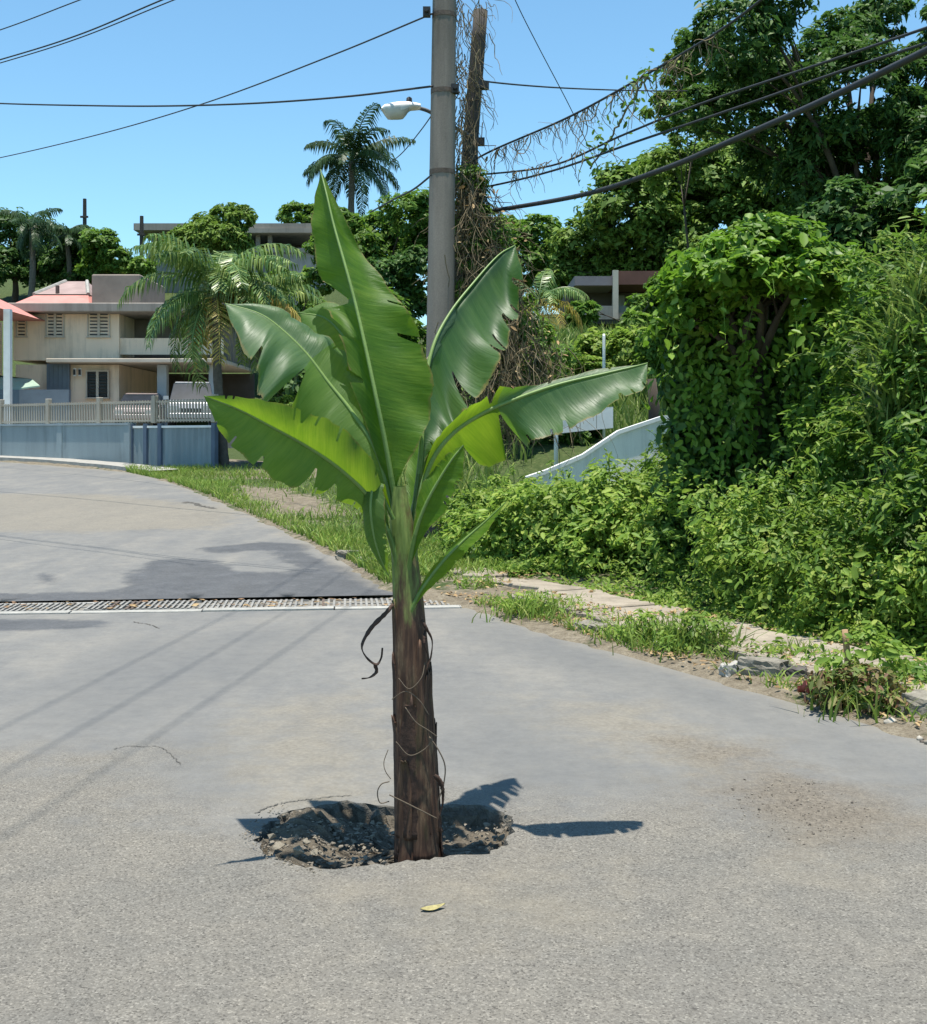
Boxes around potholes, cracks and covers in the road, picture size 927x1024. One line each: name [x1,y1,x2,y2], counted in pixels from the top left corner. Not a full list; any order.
pothole [239,795,522,873]
